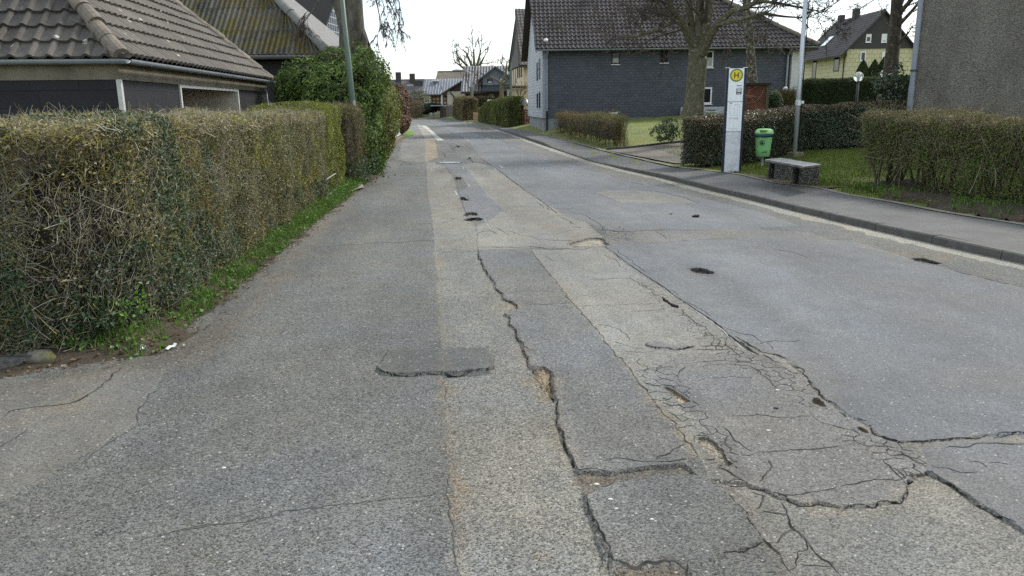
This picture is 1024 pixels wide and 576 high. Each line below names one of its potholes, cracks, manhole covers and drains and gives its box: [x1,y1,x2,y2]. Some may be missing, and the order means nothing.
pothole [686,266,718,276]
crack [81,390,158,463]
pothole [694,436,737,469]
crack [0,367,122,447]
crack [359,202,1024,576]
pothole [661,385,694,405]
pothole [908,256,947,266]
pothole [528,365,558,406]
